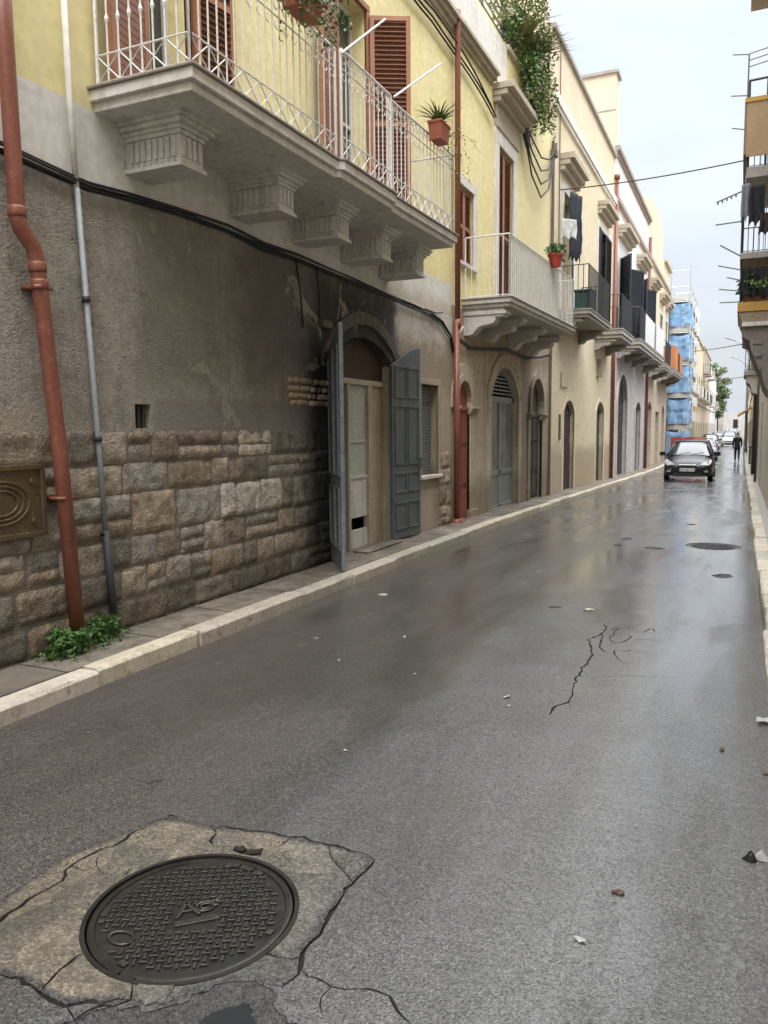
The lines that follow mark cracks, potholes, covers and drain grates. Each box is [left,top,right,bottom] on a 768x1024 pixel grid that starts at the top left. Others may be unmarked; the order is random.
manhole cover [685,542,742,550]
crack [549,625,654,715]
manhole cover [79,847,299,986]
crack [0,831,403,1021]
